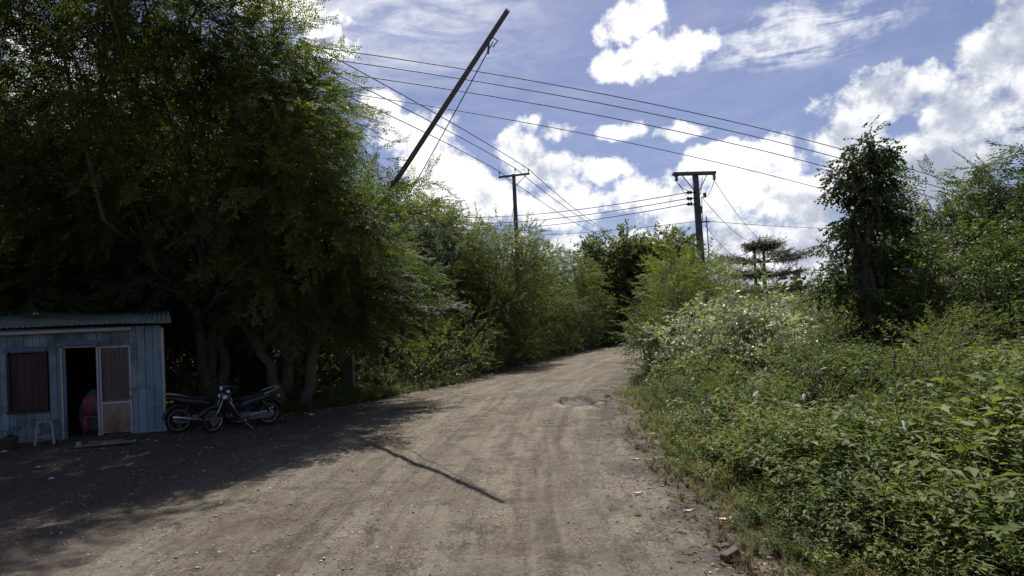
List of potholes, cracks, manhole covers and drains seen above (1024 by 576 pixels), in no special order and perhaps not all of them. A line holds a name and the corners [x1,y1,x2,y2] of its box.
pothole [556,394,599,407]
